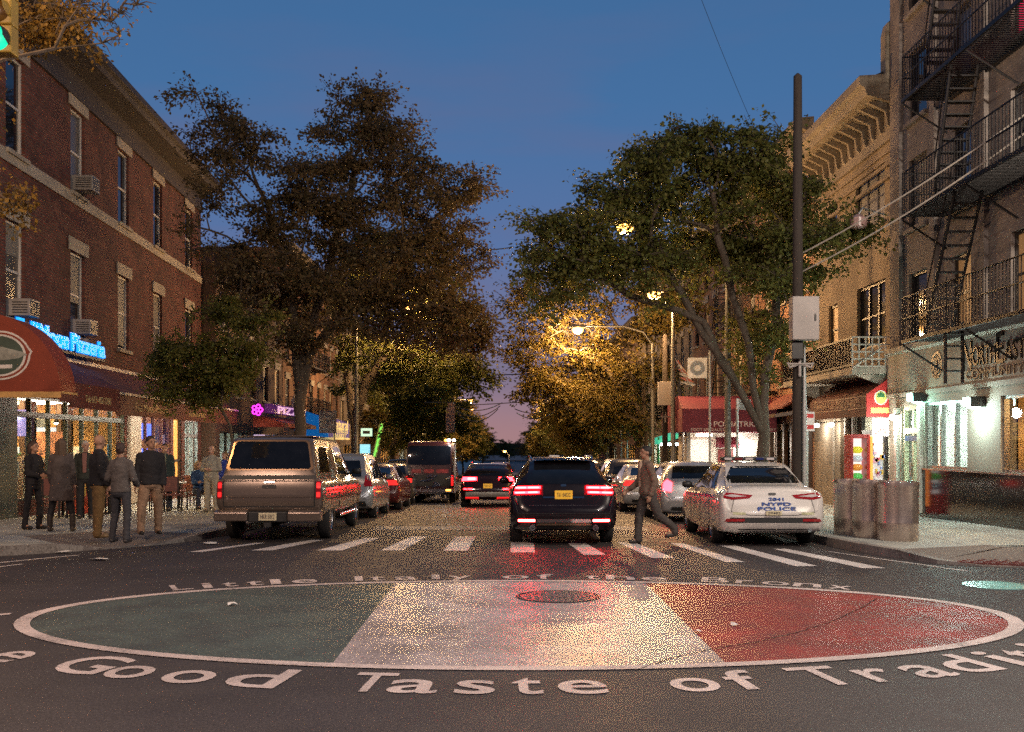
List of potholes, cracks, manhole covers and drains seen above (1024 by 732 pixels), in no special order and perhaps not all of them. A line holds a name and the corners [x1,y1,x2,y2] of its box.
manhole cover [516,590,601,603]
